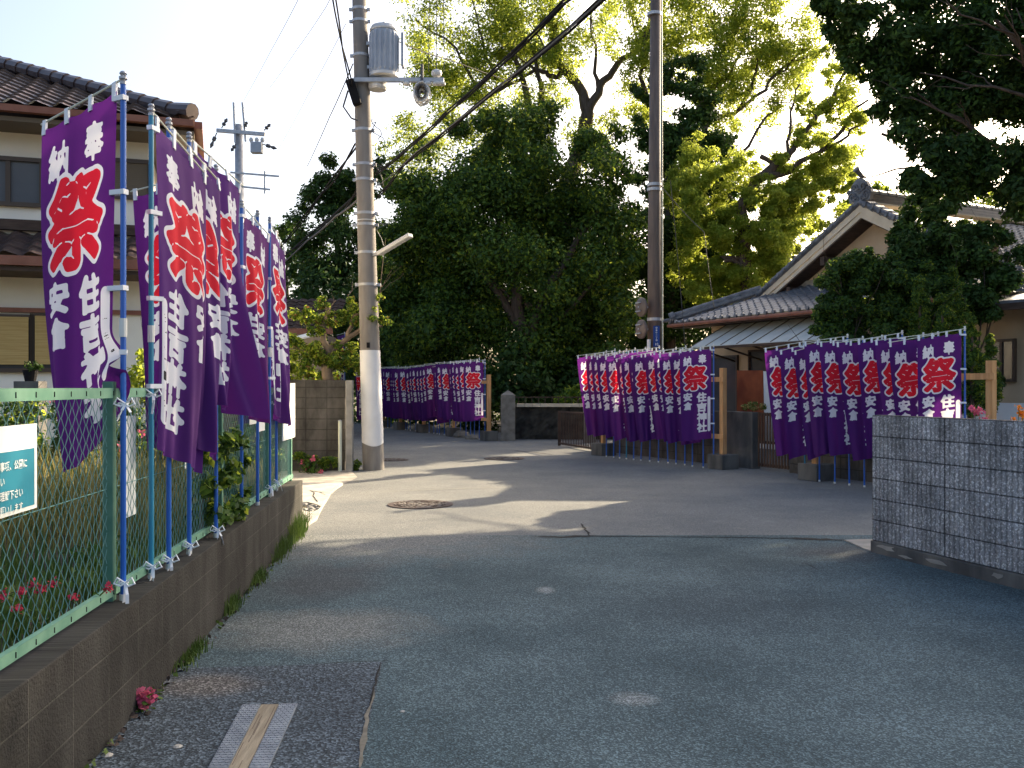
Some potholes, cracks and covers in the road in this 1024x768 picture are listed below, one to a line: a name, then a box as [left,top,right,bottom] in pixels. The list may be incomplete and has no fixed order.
manhole cover [388,500,453,509]
